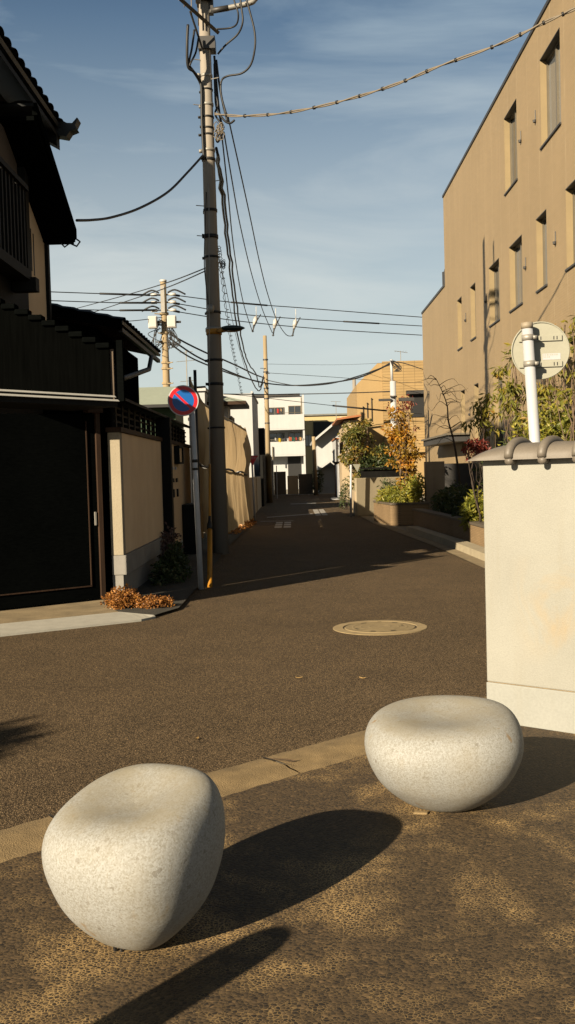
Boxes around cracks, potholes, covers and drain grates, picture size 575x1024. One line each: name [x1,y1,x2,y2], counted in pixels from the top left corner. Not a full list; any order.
manhole cover [333,620,427,635]
